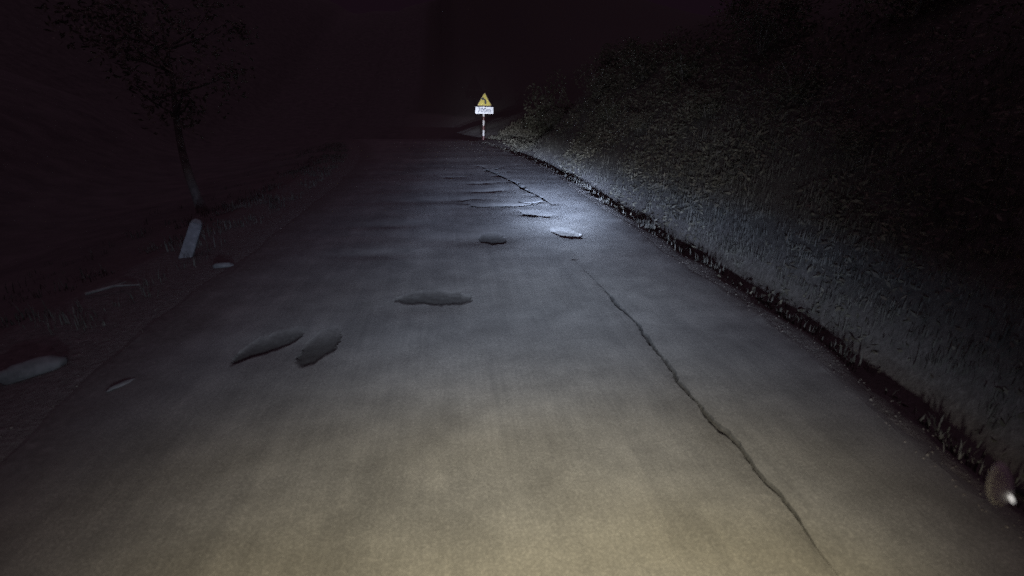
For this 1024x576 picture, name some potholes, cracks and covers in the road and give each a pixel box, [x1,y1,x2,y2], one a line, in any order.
pothole [549,226,584,239]
pothole [294,325,344,369]
crack [581,267,839,576]
pothole [229,326,306,368]
crack [465,167,550,217]
pothole [392,289,473,307]
pothole [475,231,507,246]
